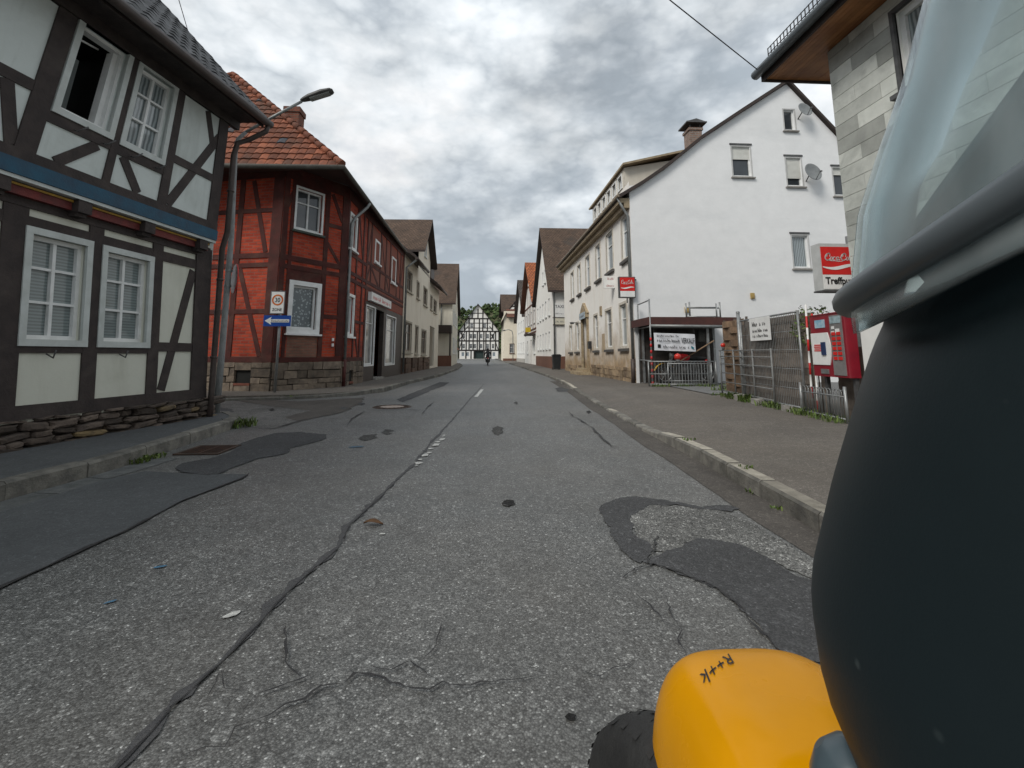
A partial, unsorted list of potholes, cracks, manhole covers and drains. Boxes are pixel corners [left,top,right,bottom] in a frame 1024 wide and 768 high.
crack [186,623,537,754]
drain grate [172,445,241,455]
crack [622,536,775,646]
crack [569,412,616,447]
crack [639,596,687,656]
